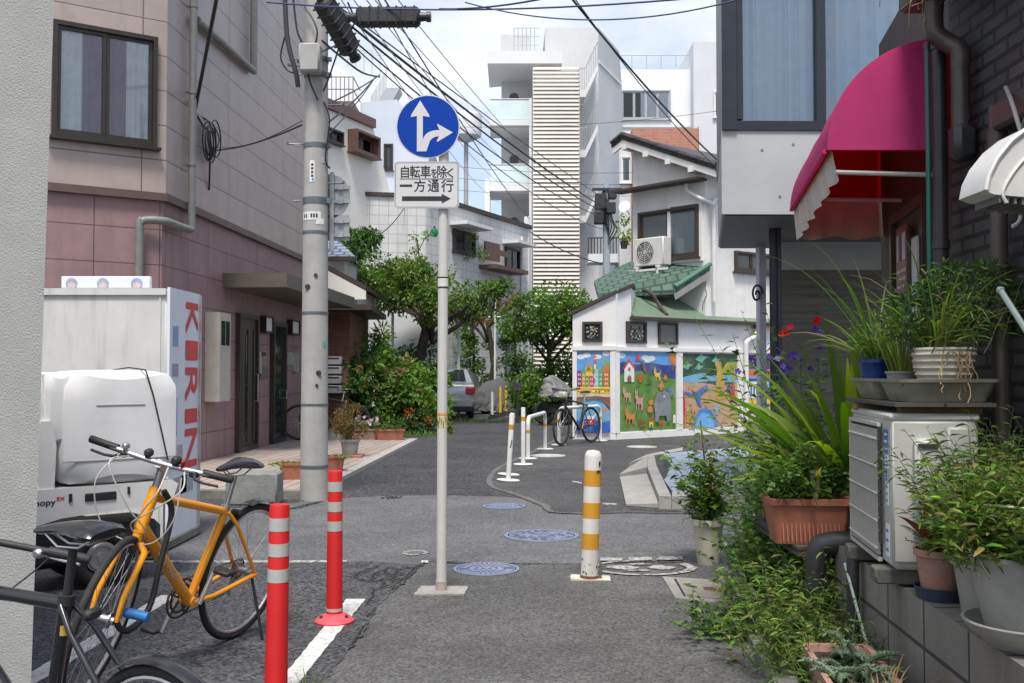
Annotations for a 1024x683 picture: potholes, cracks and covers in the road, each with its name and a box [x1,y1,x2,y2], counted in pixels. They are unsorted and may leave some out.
manhole cover [453,562,520,576]
manhole cover [504,529,579,542]
